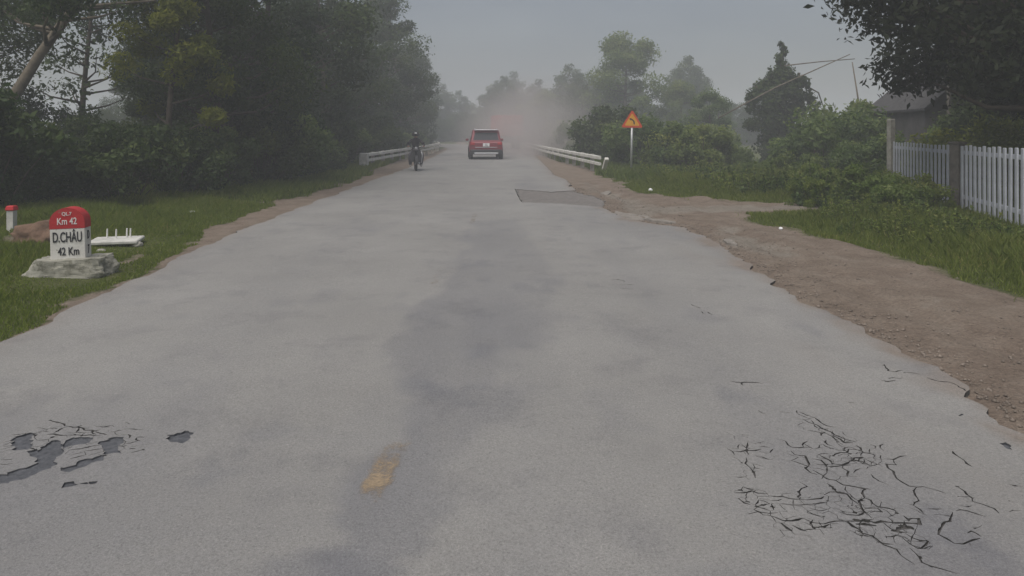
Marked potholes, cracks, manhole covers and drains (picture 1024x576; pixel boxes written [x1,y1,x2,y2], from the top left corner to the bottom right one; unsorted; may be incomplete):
pothole [166,431,193,444]
crack [729,410,1019,573]
pothole [0,433,124,484]
